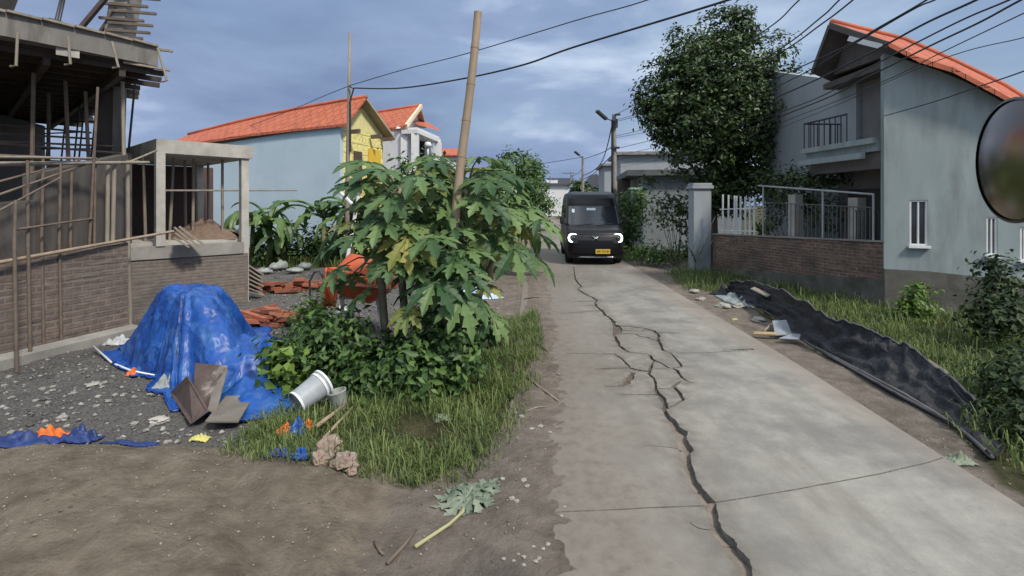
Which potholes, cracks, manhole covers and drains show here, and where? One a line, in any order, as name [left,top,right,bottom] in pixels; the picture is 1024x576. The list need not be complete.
crack [568,267,753,576]
